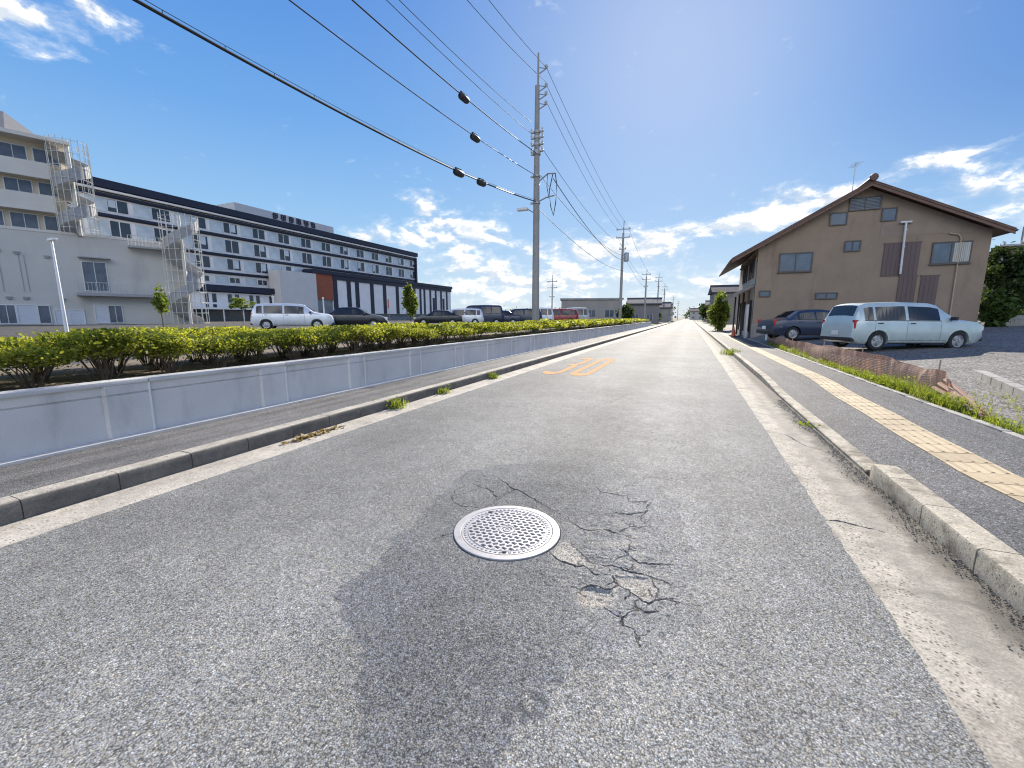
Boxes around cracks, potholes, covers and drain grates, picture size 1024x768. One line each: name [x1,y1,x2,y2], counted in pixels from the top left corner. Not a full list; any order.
manhole cover [453,506,561,562]
crack [549,486,688,647]
crack [825,520,885,533]
crack [450,476,561,515]
